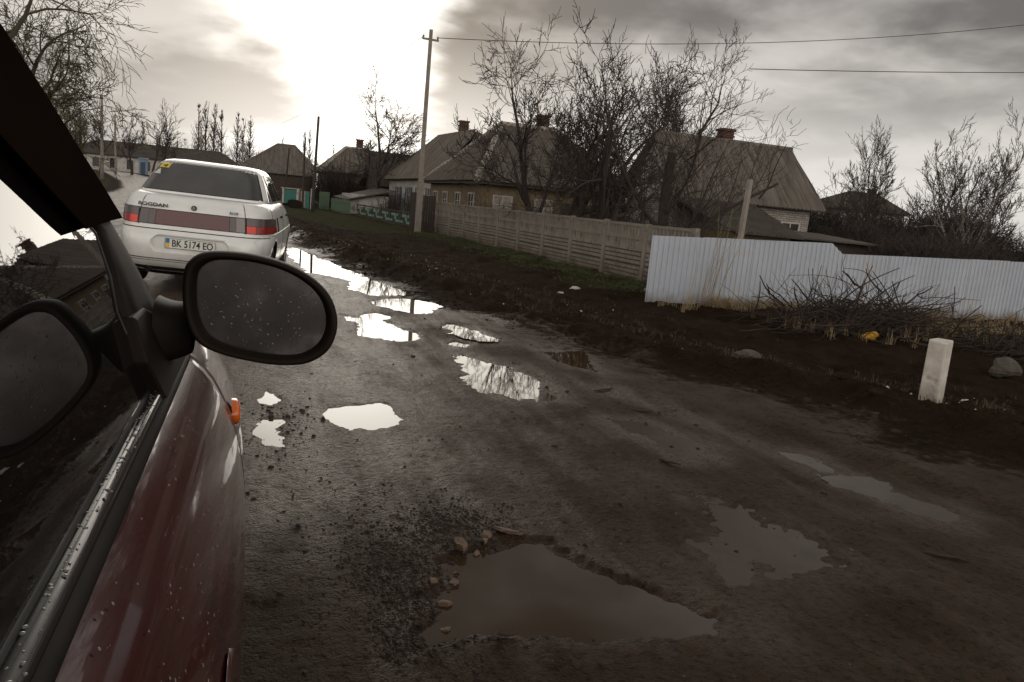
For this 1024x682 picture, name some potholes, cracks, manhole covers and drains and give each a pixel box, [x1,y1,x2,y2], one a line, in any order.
pothole [244,387,291,412]
pothole [398,531,772,660]
pothole [242,415,296,450]
pothole [440,339,479,349]
pothole [294,399,414,434]
pothole [363,296,455,315]
pothole [434,322,502,343]
pothole [337,310,432,343]
